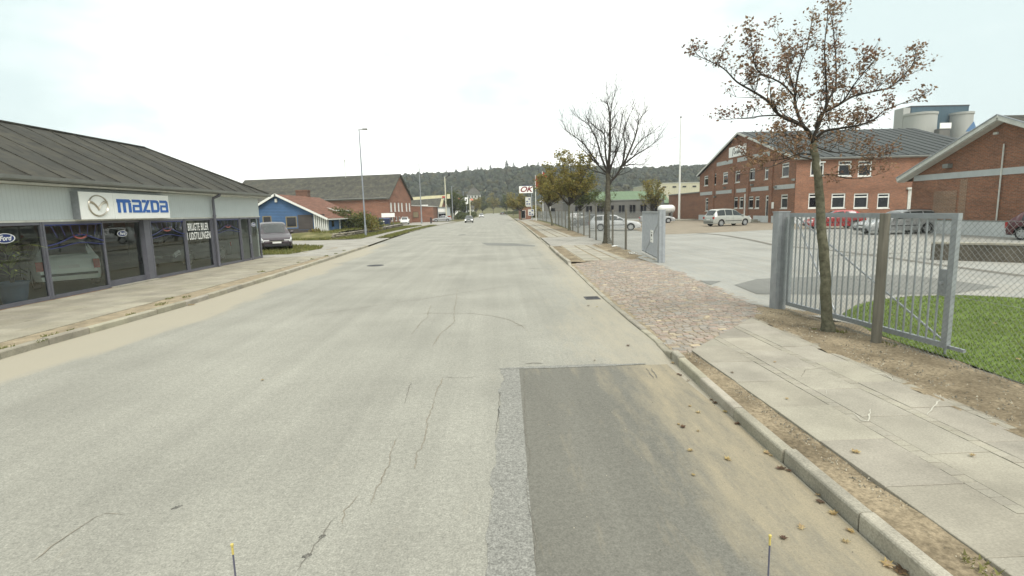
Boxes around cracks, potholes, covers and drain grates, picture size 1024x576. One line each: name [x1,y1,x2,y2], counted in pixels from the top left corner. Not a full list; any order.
crack [314,287,523,344]
crack [405,377,469,467]
crack [297,438,397,570]
crack [36,513,118,559]
